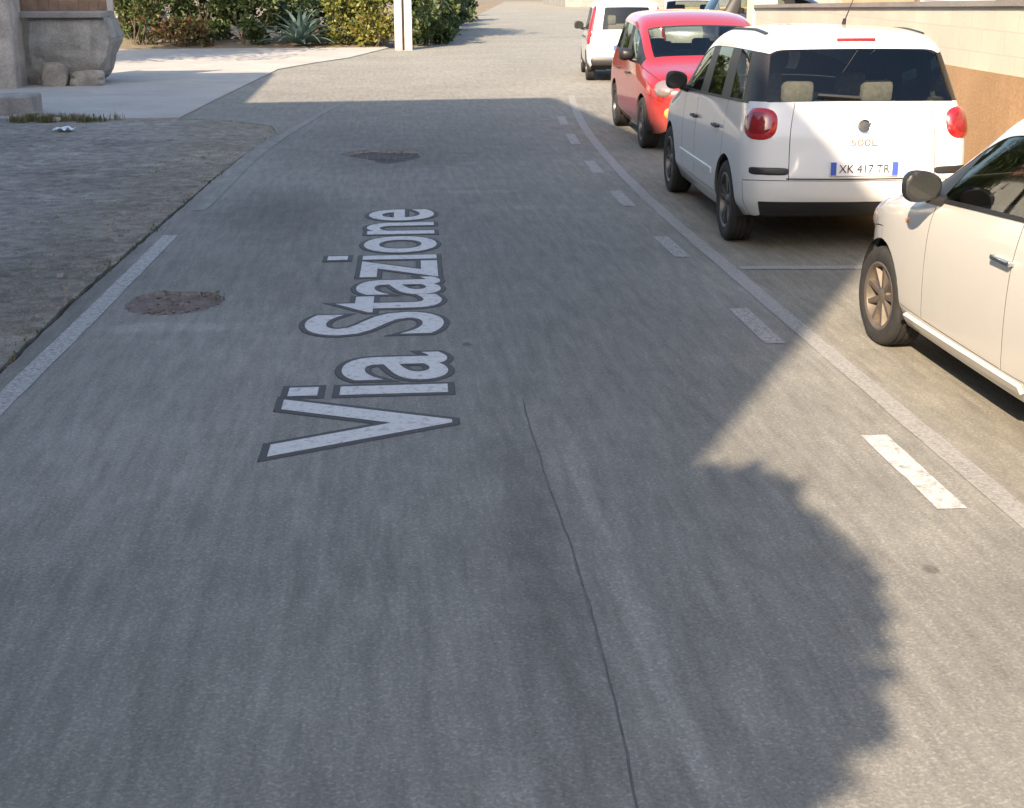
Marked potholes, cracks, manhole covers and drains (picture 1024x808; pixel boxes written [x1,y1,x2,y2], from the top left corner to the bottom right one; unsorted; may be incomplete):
crack [523,401,638,808]
